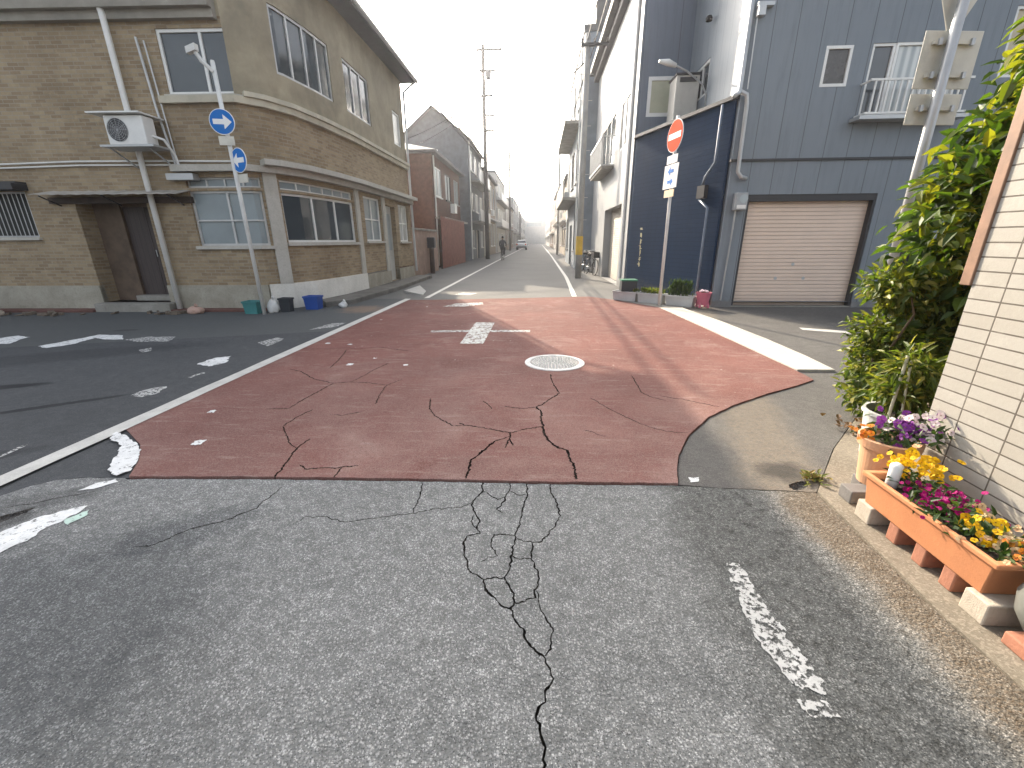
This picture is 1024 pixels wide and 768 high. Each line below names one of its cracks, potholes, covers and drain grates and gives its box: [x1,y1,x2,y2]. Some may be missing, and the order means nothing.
crack [139,347,413,547]
crack [297,374,687,768]
manhole cover [525,354,585,371]
